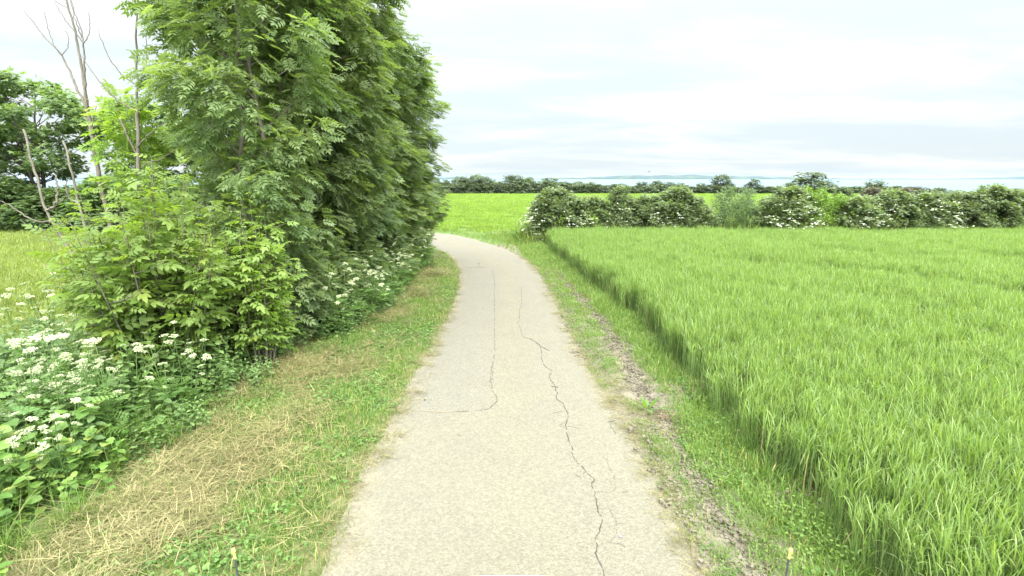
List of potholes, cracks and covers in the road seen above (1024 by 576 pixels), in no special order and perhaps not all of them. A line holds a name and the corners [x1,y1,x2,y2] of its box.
crack [517,291,629,575]
